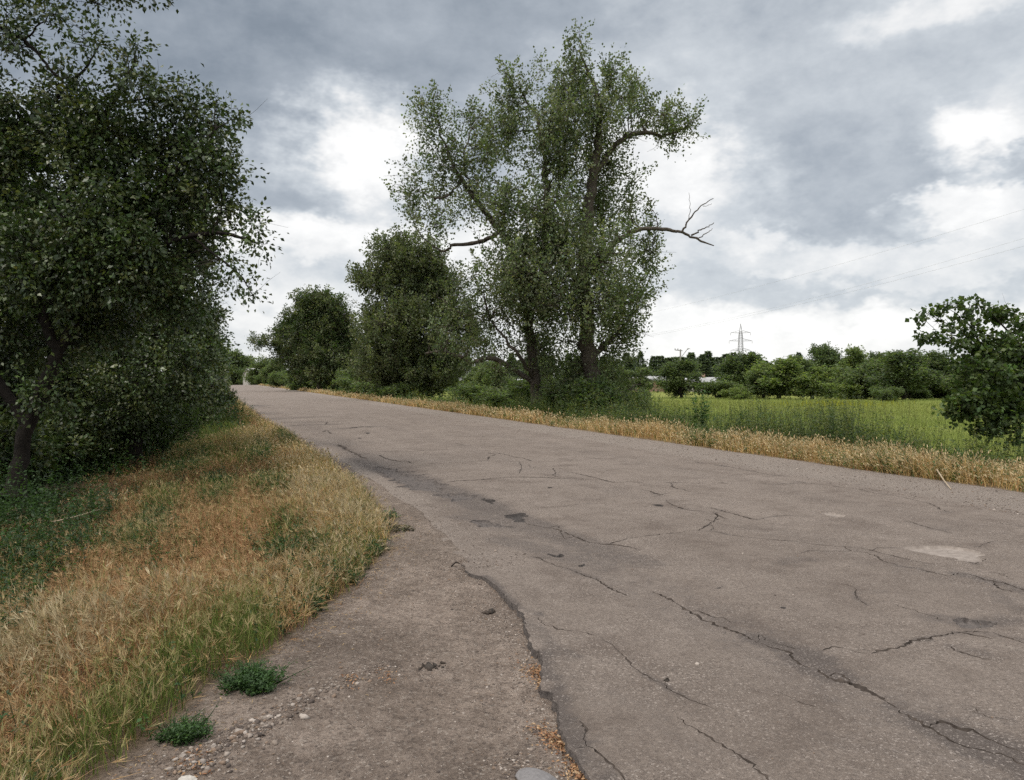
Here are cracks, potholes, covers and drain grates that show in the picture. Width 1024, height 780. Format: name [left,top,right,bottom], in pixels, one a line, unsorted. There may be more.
crack [293,417,1024,592]
crack [537,617,769,780]
pothole [504,513,528,522]
crack [652,591,1024,765]
